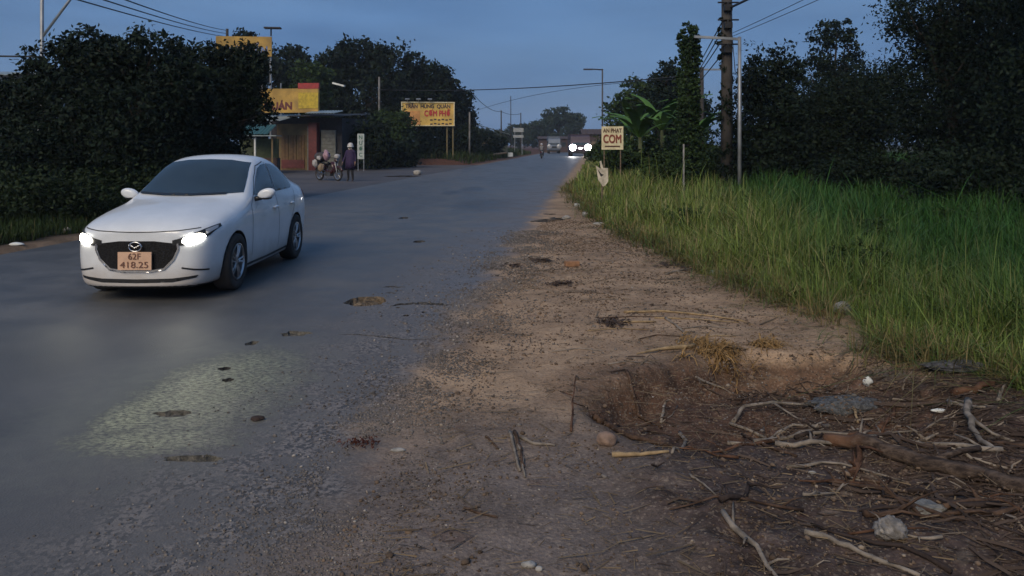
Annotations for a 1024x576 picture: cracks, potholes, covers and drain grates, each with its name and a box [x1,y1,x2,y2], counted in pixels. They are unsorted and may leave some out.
pothole [344,296,386,306]
crack [386,286,452,306]
